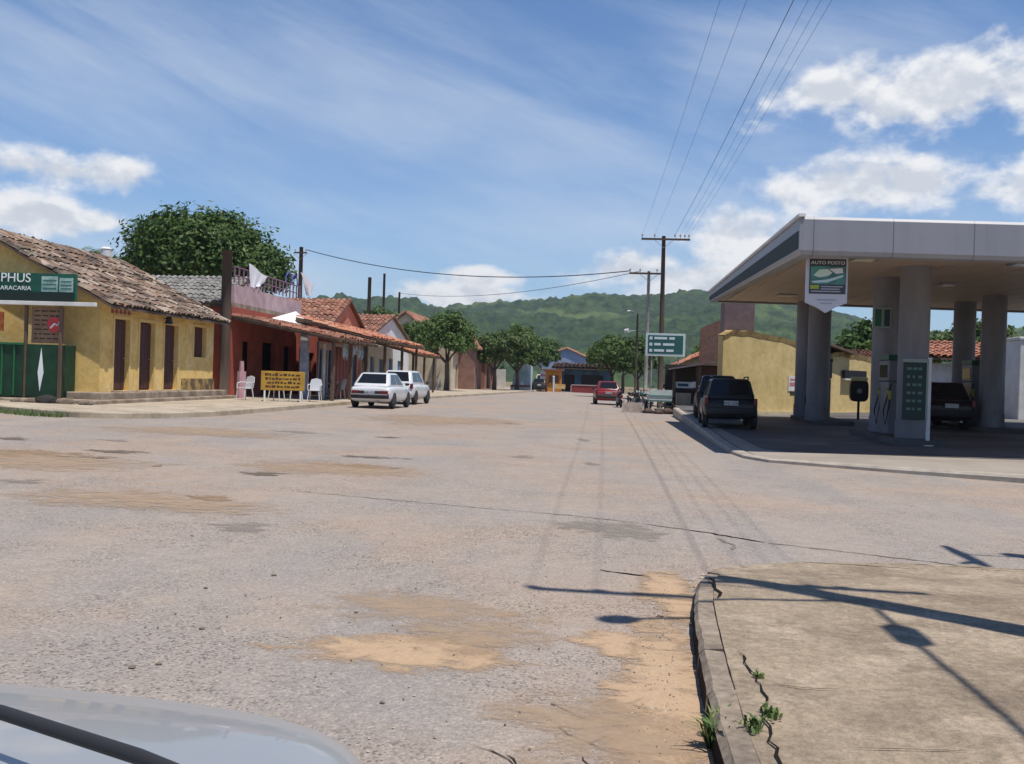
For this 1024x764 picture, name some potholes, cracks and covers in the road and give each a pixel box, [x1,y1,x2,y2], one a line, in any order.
crack [301,491,986,567]
